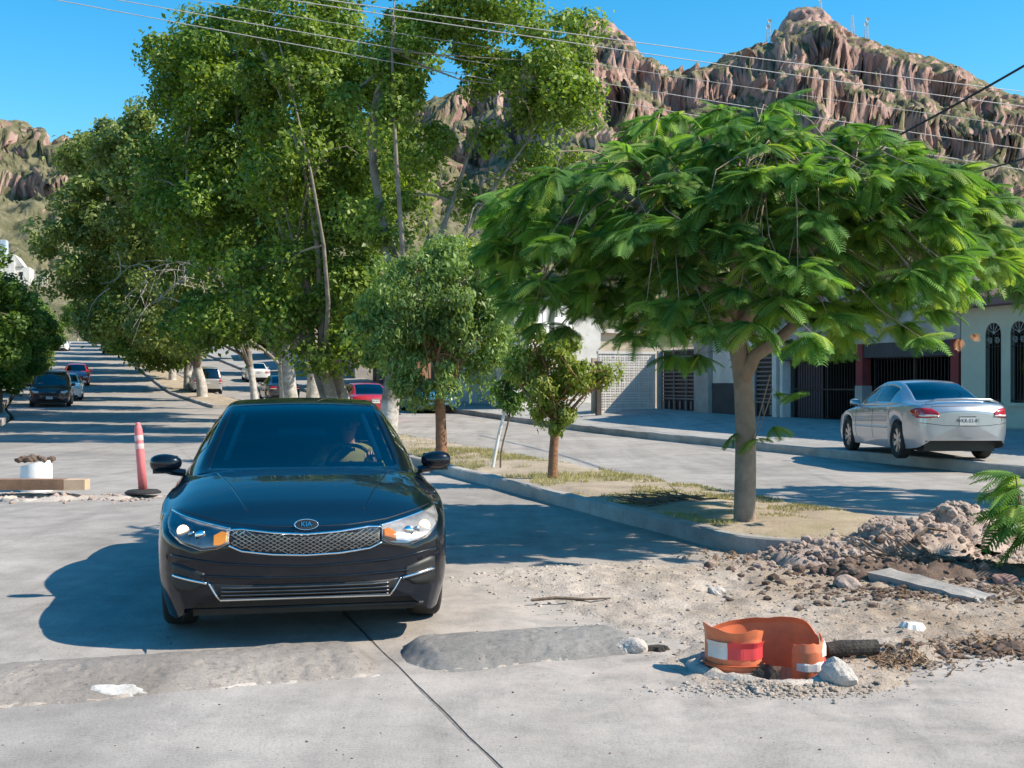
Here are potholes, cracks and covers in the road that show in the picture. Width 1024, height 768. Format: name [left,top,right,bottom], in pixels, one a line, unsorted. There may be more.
pothole [685,651,851,686]
